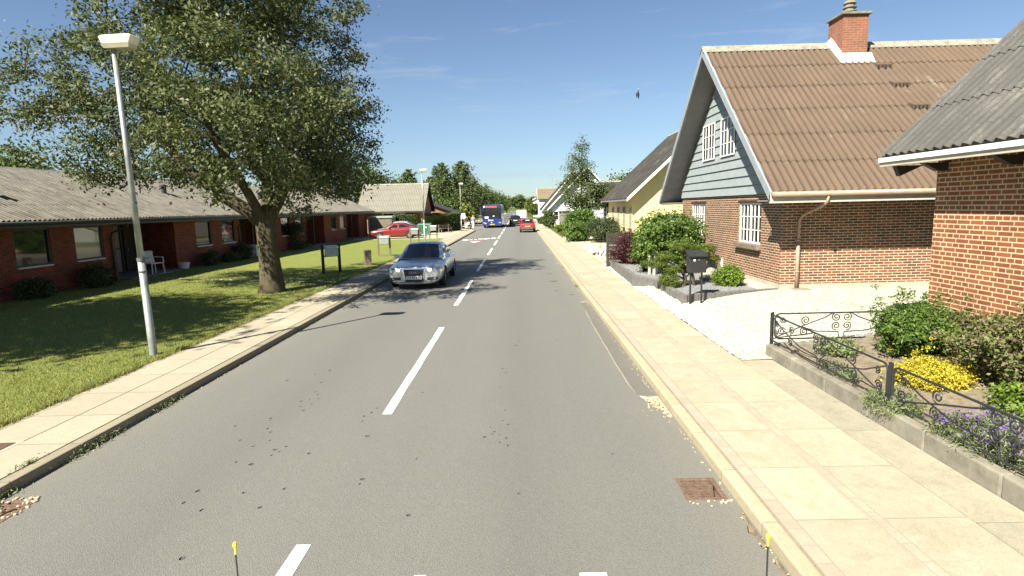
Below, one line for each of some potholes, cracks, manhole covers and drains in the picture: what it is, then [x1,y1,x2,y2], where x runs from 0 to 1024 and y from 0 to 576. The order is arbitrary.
pothole [640,396,672,418]
